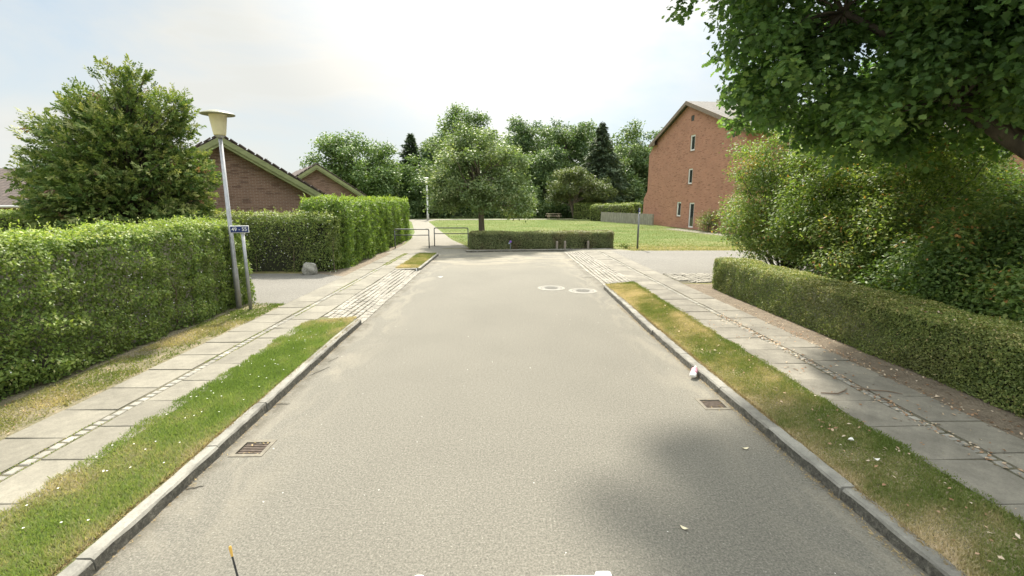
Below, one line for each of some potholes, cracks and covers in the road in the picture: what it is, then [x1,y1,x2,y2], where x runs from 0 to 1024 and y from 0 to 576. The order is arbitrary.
drain grate [228,439,277,457]
drain grate [694,398,732,410]
